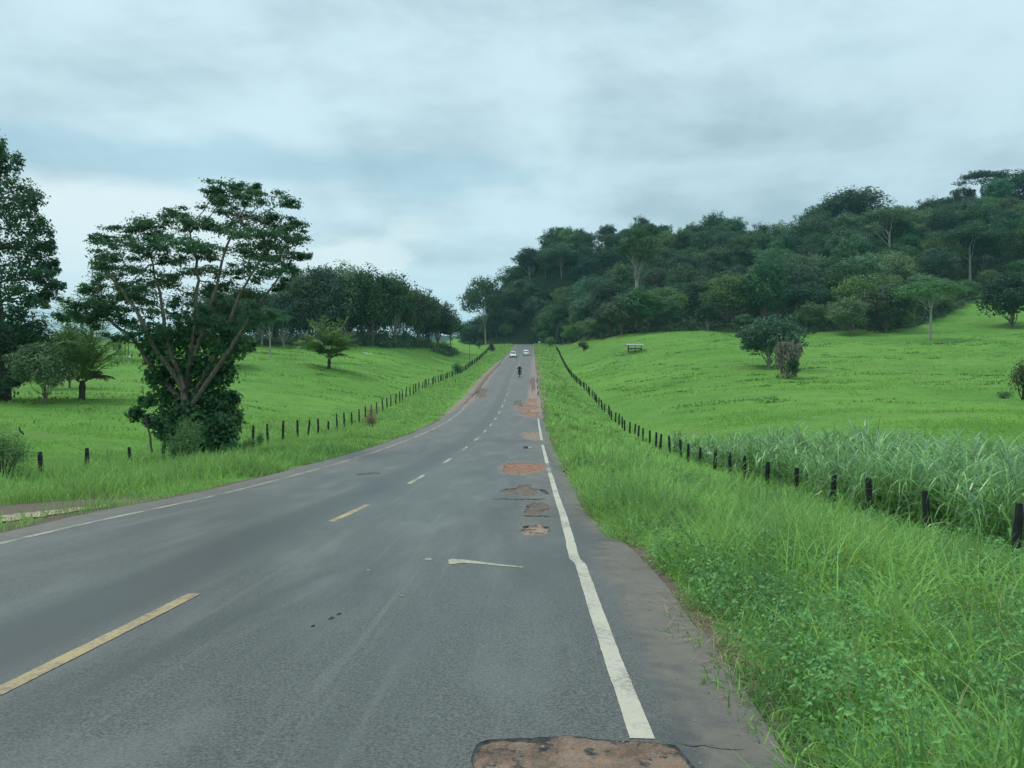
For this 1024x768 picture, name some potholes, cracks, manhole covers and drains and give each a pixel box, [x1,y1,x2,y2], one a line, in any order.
pothole [523,502,549,517]
pothole [520,524,550,536]
pothole [500,485,540,496]
